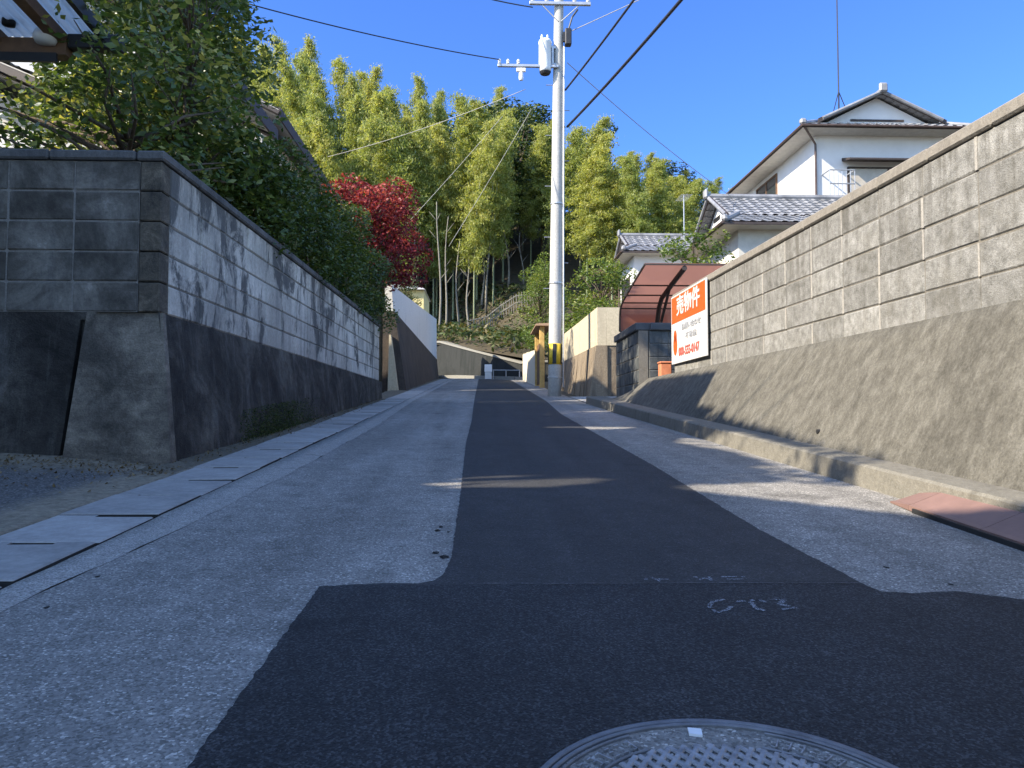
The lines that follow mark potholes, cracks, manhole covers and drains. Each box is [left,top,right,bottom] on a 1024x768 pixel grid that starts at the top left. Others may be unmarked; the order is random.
manhole cover [540,719,899,768]
